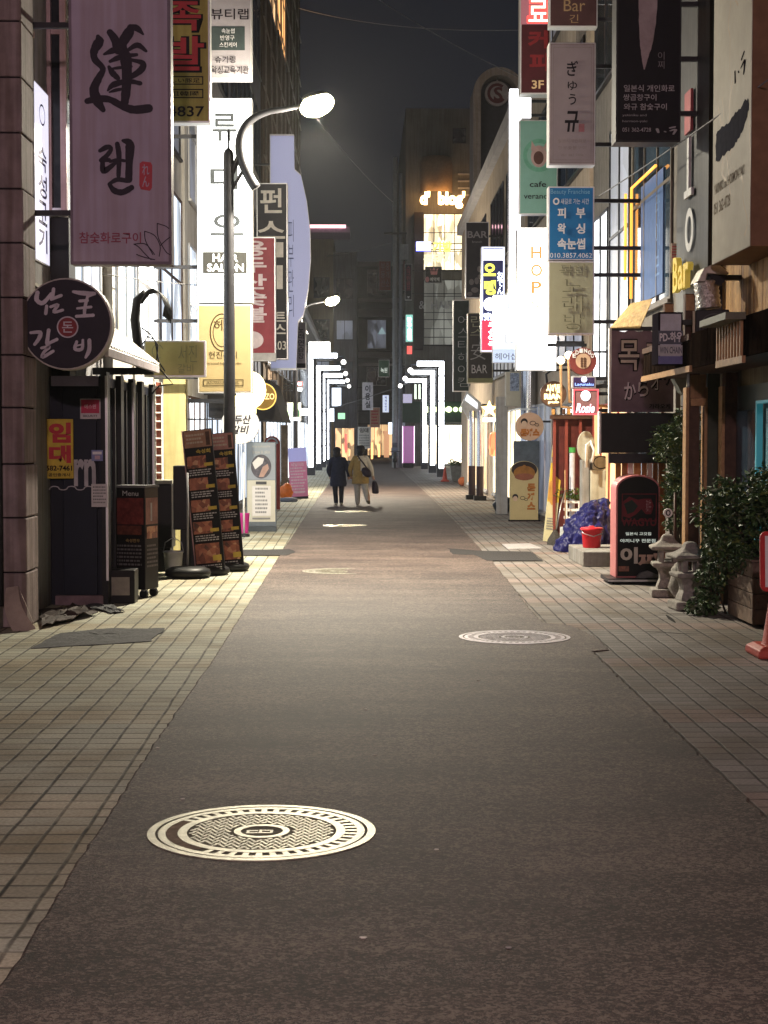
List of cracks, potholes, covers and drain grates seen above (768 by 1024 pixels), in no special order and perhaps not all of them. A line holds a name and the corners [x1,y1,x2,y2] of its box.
manhole cover [459,630,570,644]
manhole cover [147,805,376,862]
